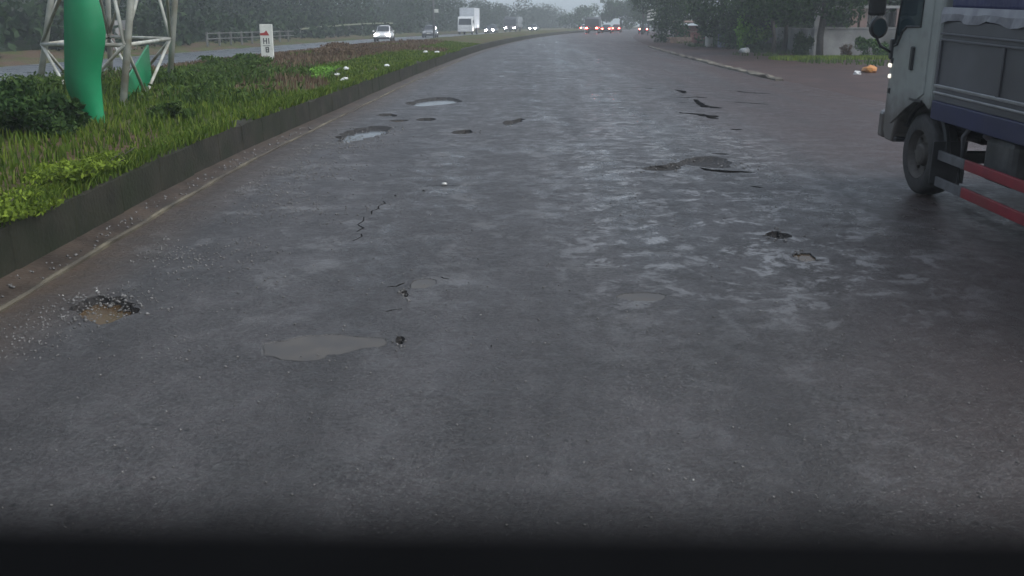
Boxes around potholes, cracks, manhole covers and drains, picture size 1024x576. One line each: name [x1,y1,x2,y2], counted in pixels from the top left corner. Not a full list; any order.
pothole [766,231,792,239]
pothole [405,97,462,106]
pothole [642,156,732,171]
pothole [69,295,140,325]
pothole [616,292,666,301]
pothole [261,334,390,362]
crack [353,201,386,241]
pothole [792,253,816,262]
pothole [334,126,392,143]
